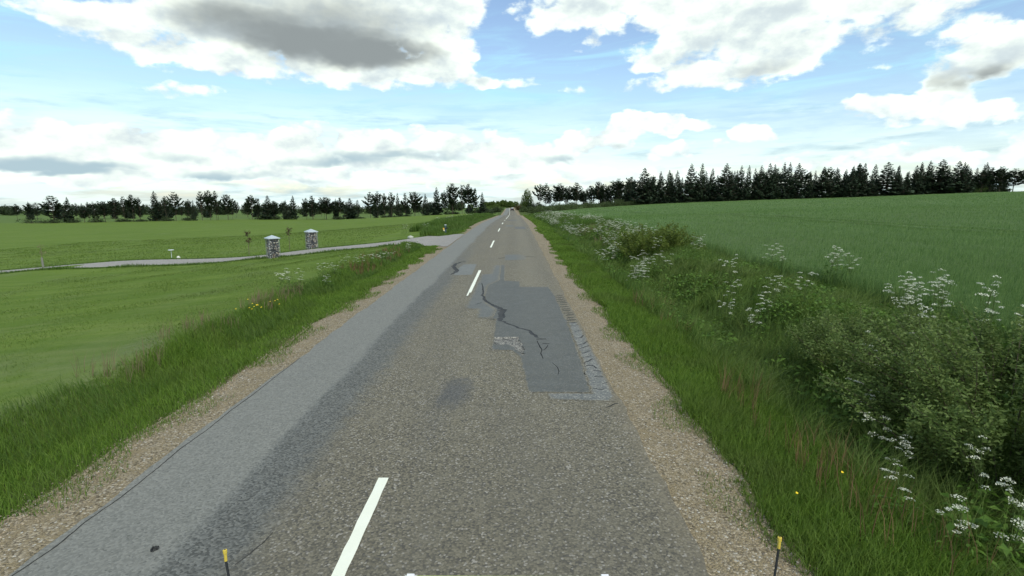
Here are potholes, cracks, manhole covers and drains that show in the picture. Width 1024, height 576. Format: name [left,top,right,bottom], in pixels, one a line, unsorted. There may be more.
crack [478,285,619,408]
pothole [493,337,525,355]
